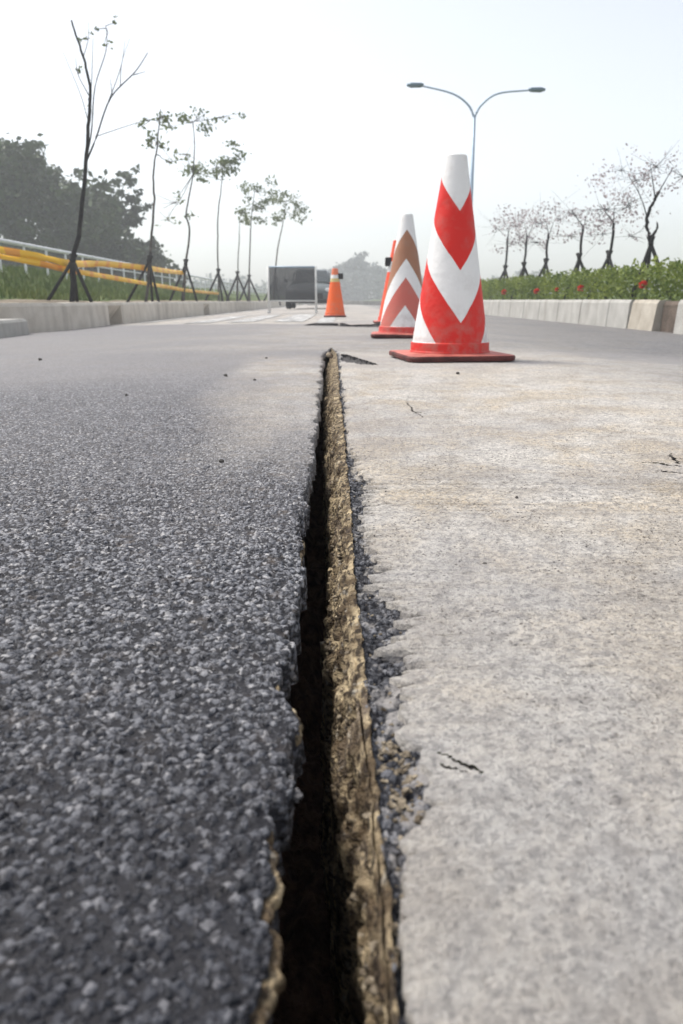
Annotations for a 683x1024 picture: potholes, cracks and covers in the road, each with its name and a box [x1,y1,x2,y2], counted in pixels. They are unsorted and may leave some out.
crack [249,348,479,1024]
crack [655,454,680,473]
